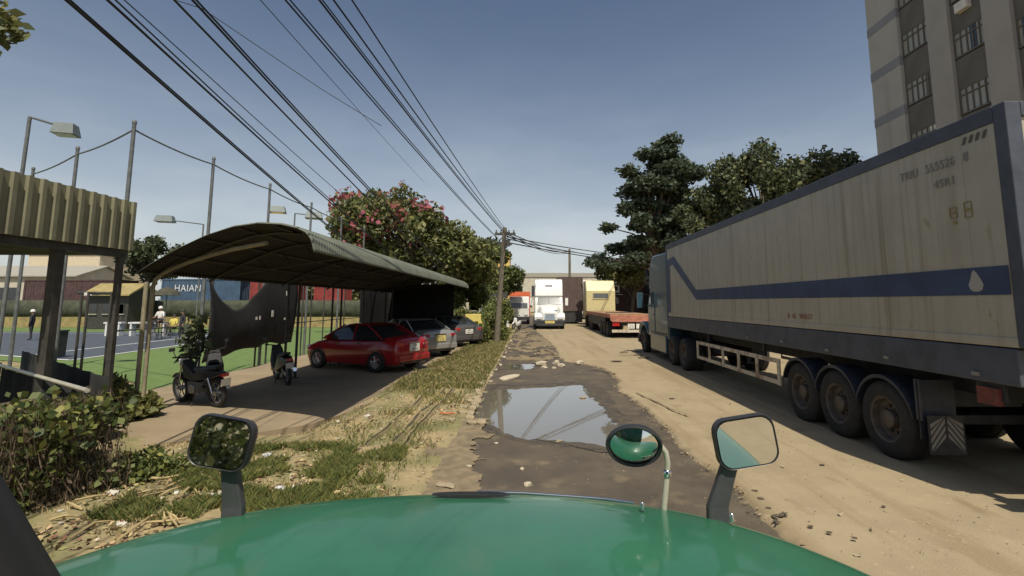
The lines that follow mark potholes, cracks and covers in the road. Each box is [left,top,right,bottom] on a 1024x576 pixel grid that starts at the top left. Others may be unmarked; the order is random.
pothole [497,362,541,370]
crack [636,392,688,415]
pothole [474,382,632,451]
